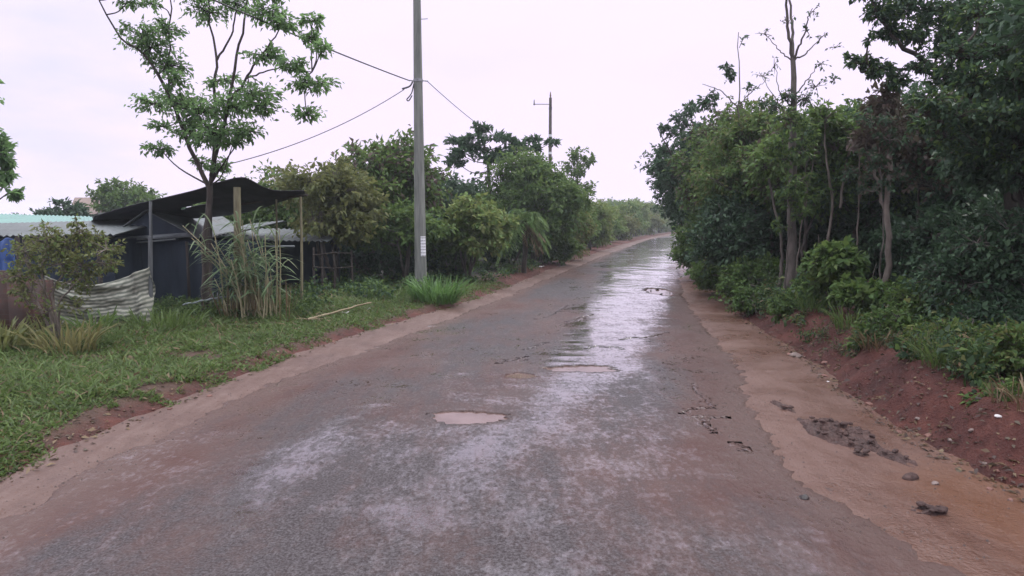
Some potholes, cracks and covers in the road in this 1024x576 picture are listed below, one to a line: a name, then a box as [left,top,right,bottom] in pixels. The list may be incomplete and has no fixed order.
pothole [641,287,678,296]
pothole [501,371,540,380]
crack [534,304,592,322]
crack [678,383,751,452]
pothole [425,409,517,426]
pothole [537,364,623,373]
